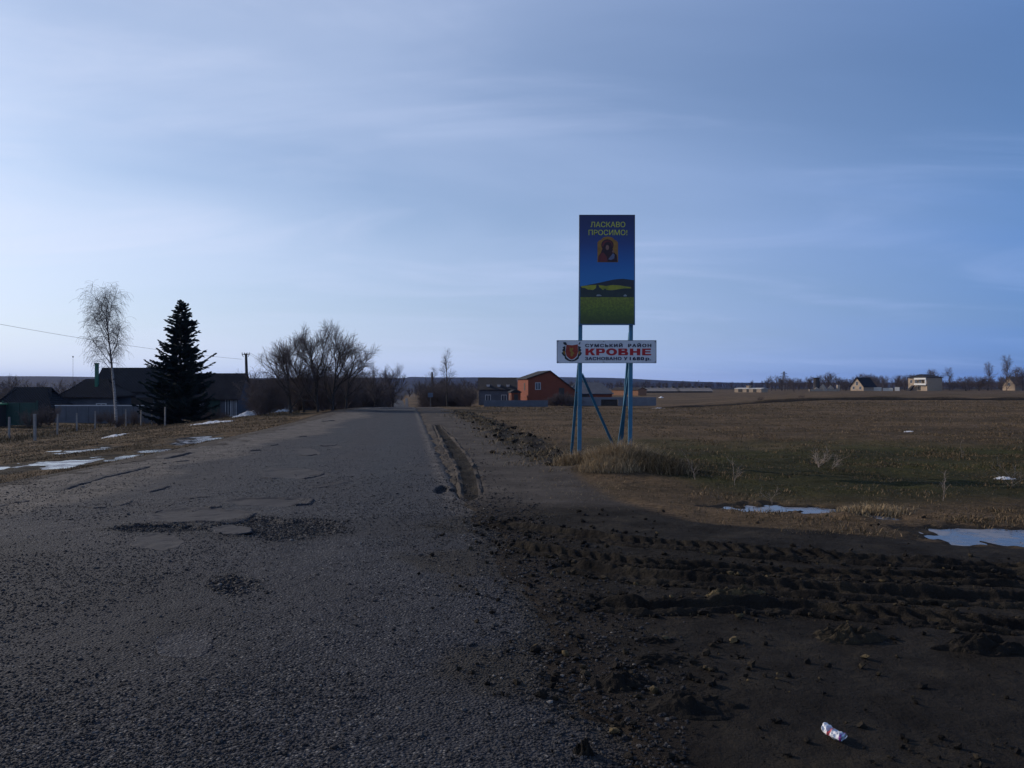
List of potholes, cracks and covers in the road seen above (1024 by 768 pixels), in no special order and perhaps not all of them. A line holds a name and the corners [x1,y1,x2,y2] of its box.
pothole [114,524,212,532]
pothole [208,574,259,596]
crack [298,420,335,456]
crack [48,452,258,525]
pothole [207,517,343,540]
